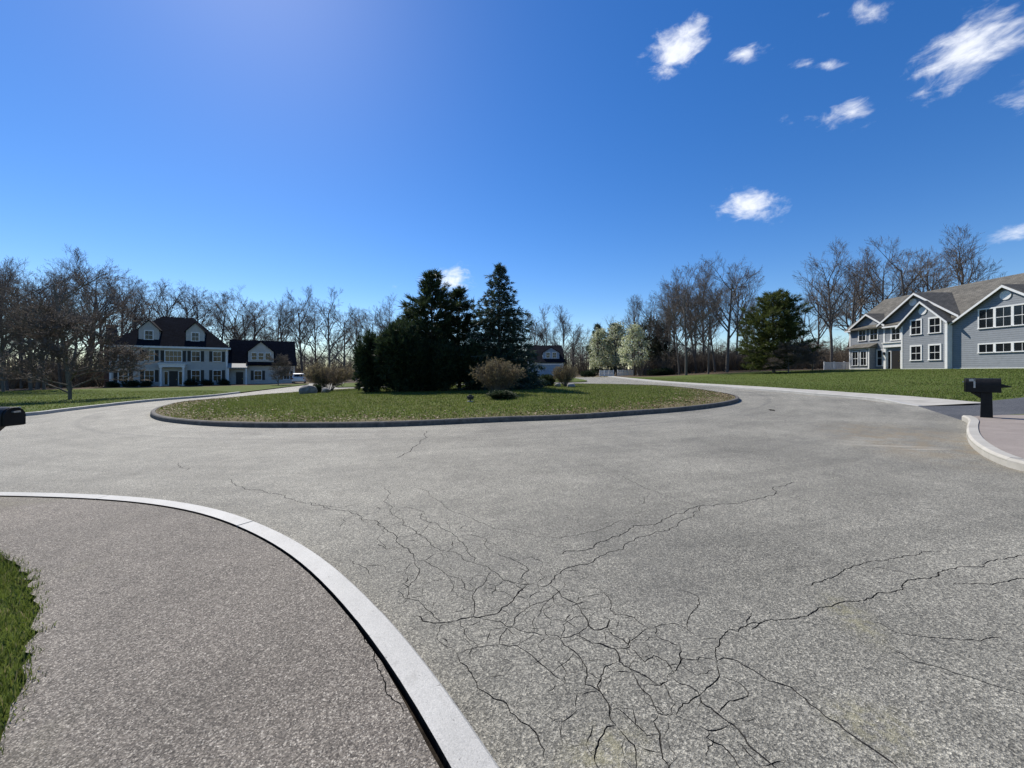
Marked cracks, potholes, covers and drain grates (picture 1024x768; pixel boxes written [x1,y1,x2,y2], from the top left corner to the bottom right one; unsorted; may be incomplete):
crack [235,478,1024,768]
